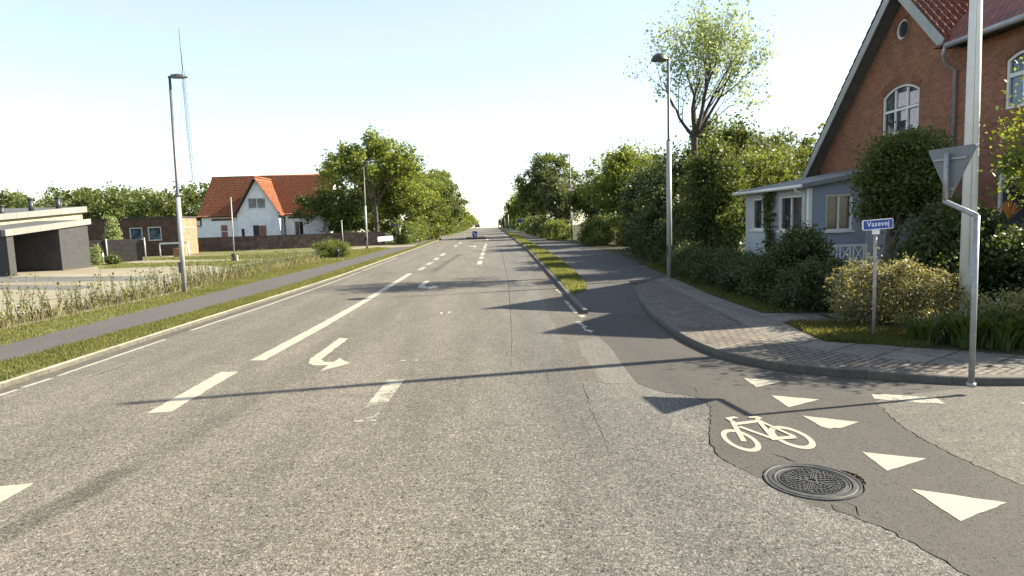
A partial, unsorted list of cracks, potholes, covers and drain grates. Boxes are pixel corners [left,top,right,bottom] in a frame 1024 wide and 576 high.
crack [807,502,970,576]
manhole cover [762,463,864,501]
crack [640,384,758,477]
